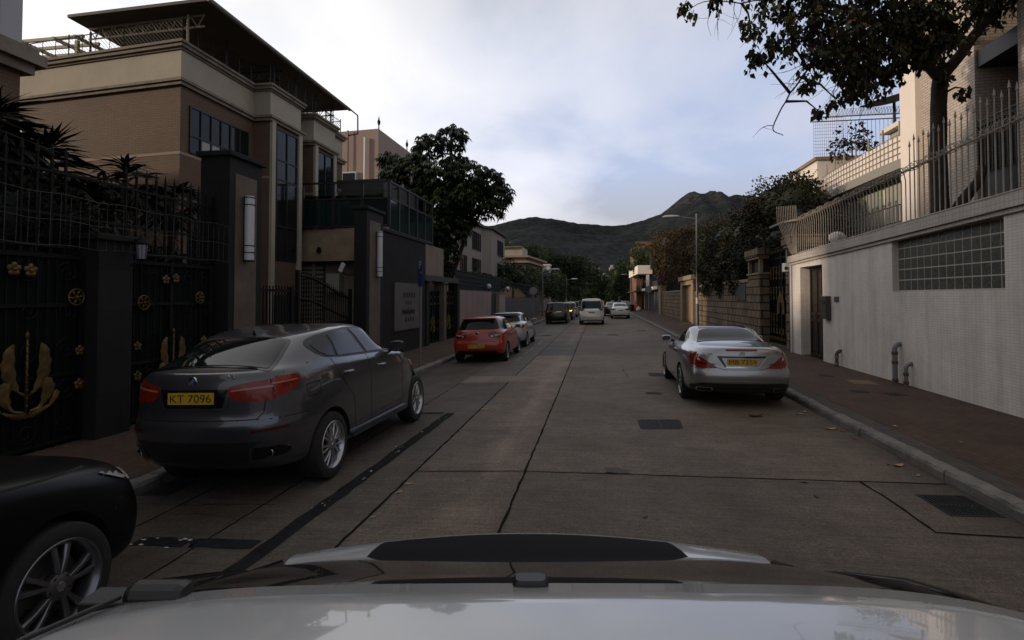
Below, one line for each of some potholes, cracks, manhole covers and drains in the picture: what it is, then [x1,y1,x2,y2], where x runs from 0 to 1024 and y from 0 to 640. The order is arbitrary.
drain grate [915,494,1006,518]
